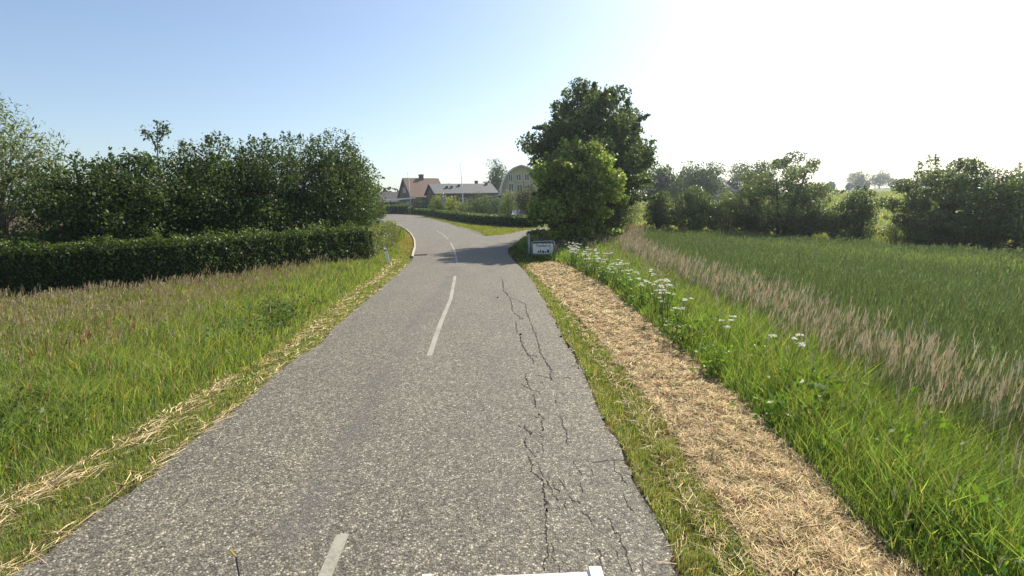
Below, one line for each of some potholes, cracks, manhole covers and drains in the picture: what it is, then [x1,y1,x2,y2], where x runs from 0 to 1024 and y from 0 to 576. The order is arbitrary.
crack [500,277,644,572]
